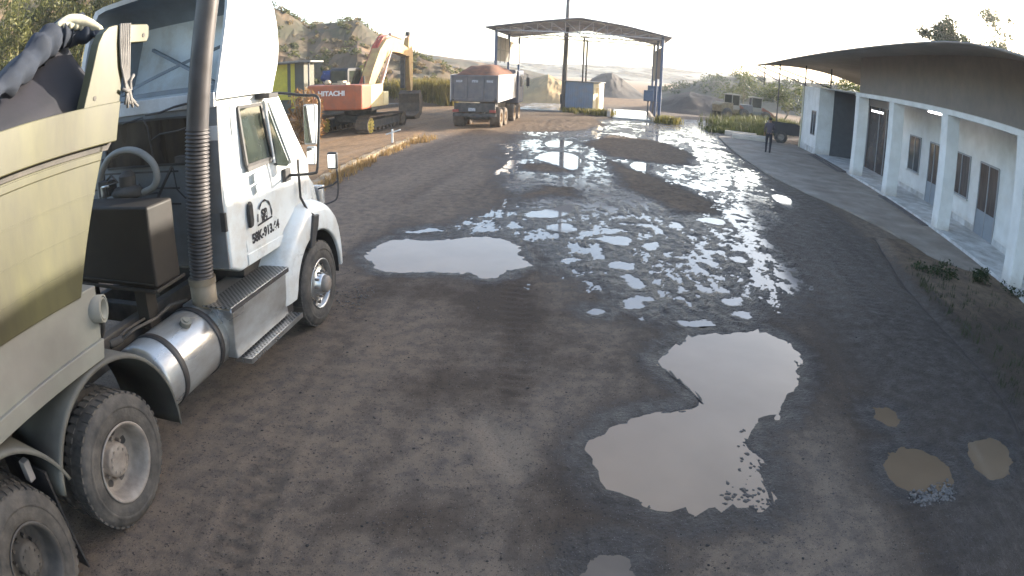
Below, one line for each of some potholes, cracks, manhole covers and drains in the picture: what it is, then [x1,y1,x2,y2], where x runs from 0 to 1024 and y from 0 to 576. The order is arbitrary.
pothole [961,432,1017,486]
pothole [723,307,760,321]
pothole [554,255,589,265]
pothole [592,234,638,247]
pothole [712,295,750,308]
pothole [726,254,753,265]
pothole [520,203,578,219]
pothole [865,403,908,433]
pothole [668,316,724,331]
pothole [542,140,575,148]
pothole [565,539,651,576]
pothole [541,222,581,234]
